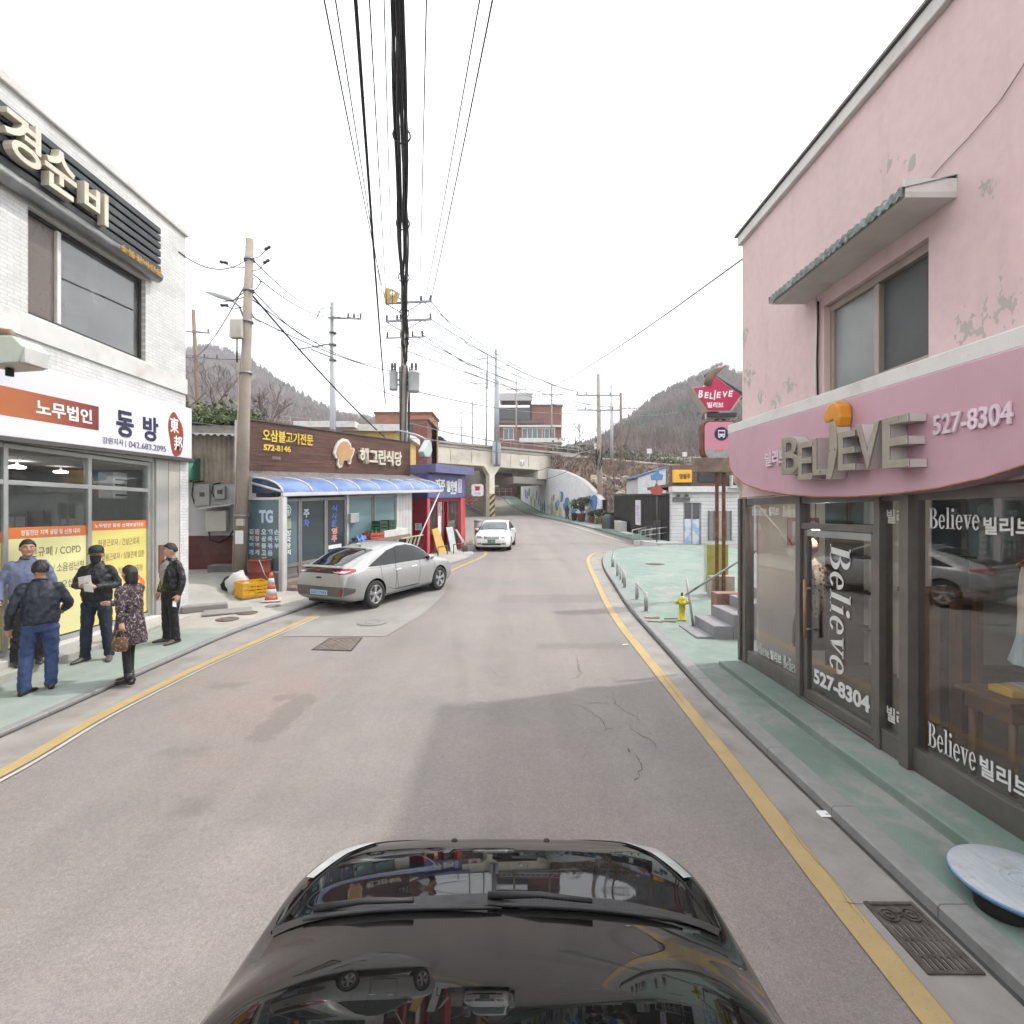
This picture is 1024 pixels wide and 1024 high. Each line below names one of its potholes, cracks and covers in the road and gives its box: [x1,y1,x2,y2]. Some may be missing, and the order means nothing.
crack [571,691,656,781]
drain grate [863,901,986,976]
